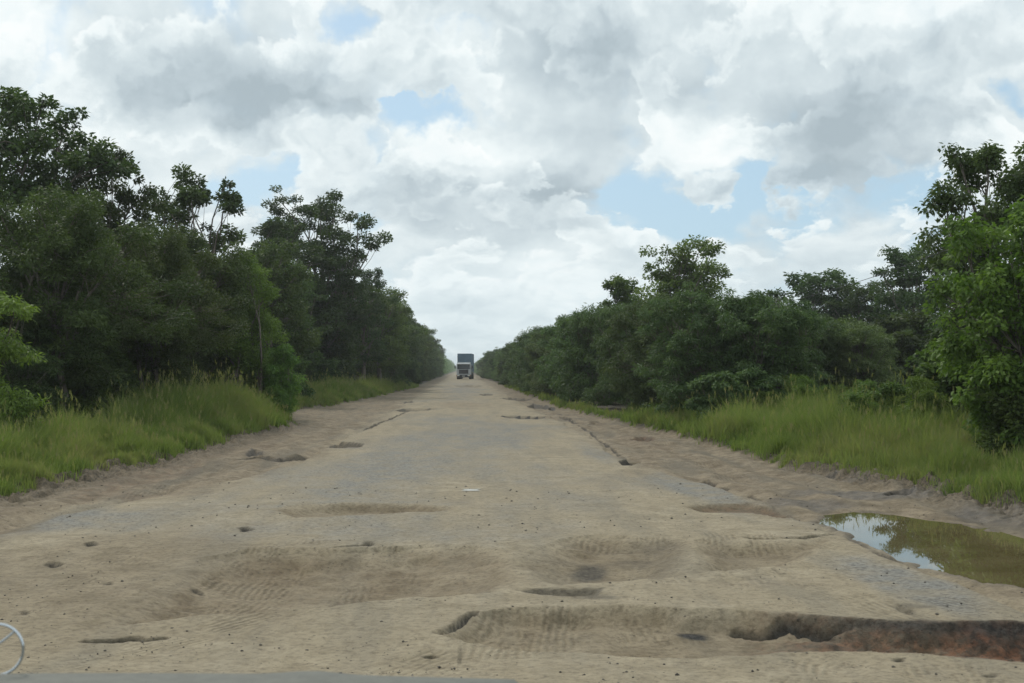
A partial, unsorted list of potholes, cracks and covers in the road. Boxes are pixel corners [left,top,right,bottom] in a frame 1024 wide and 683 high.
pothole [244,448,265,457]
pothole [808,511,1008,586]
pothole [238,454,309,462]
pothole [517,587,607,597]
pothole [519,534,701,587]
crack [553,413,626,459]
pothole [426,604,1024,662]
pothole [58,543,530,636]
crack [363,412,407,431]
pothole [269,502,462,519]
